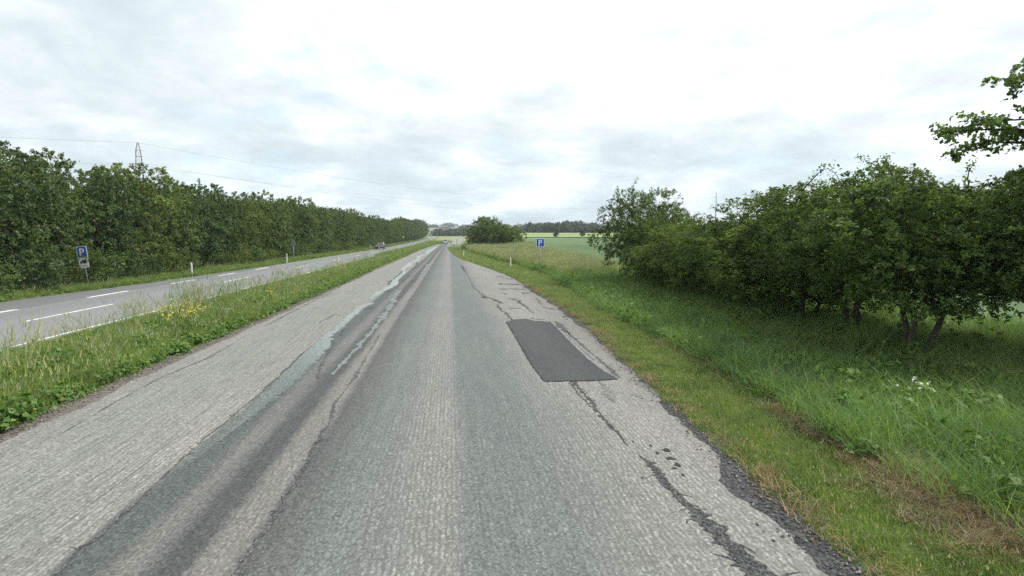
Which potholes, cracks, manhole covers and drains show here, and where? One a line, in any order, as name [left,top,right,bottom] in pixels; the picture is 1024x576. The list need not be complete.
crack [461,265,800,576]
